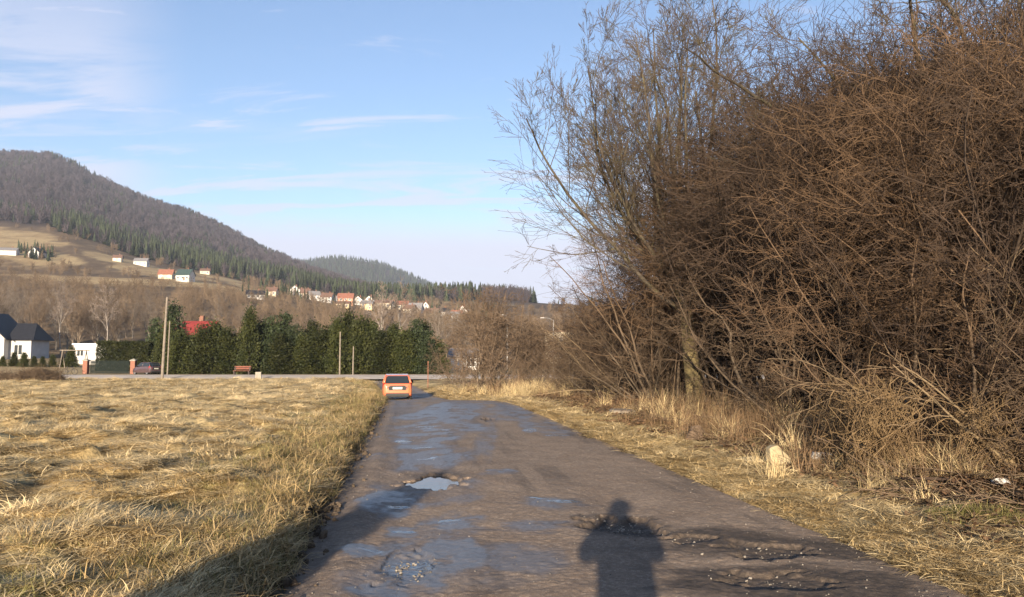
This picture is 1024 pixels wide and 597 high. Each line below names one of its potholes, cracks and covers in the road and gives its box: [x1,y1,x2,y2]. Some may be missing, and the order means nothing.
pothole [365,548,438,588]
pothole [712,538,825,567]
pothole [716,569,848,591]
pothole [571,514,670,537]
pothole [392,473,469,491]
